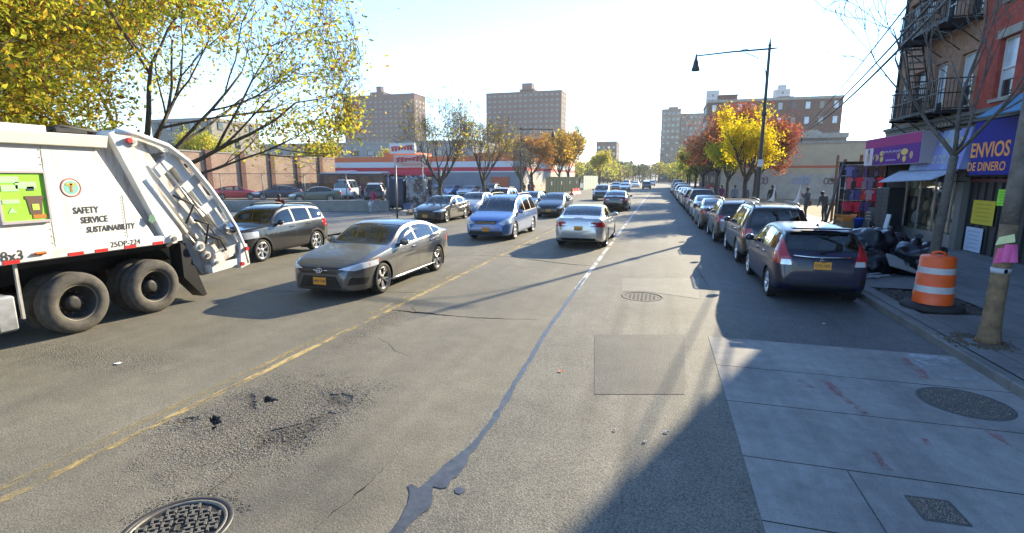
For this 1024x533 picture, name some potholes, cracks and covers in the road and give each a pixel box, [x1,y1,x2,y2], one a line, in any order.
manhole cover [915,387,1018,421]
crack [312,456,395,533]
manhole cover [621,292,663,301]
utility cover [904,495,973,527]
pothole [324,393,353,407]
manhole cover [121,496,234,533]
crack [381,292,530,320]
pothole [243,393,257,410]
